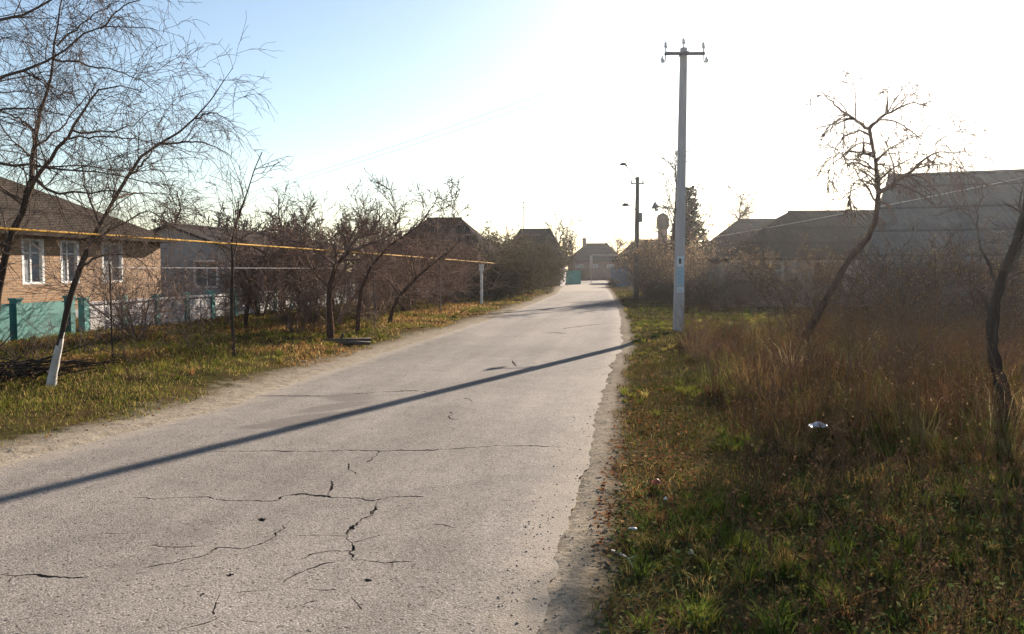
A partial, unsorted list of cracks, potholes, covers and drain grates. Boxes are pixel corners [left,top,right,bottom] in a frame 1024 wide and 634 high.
crack [1,573,84,585]
crack [133,445,548,610]
crack [180,595,220,630]
